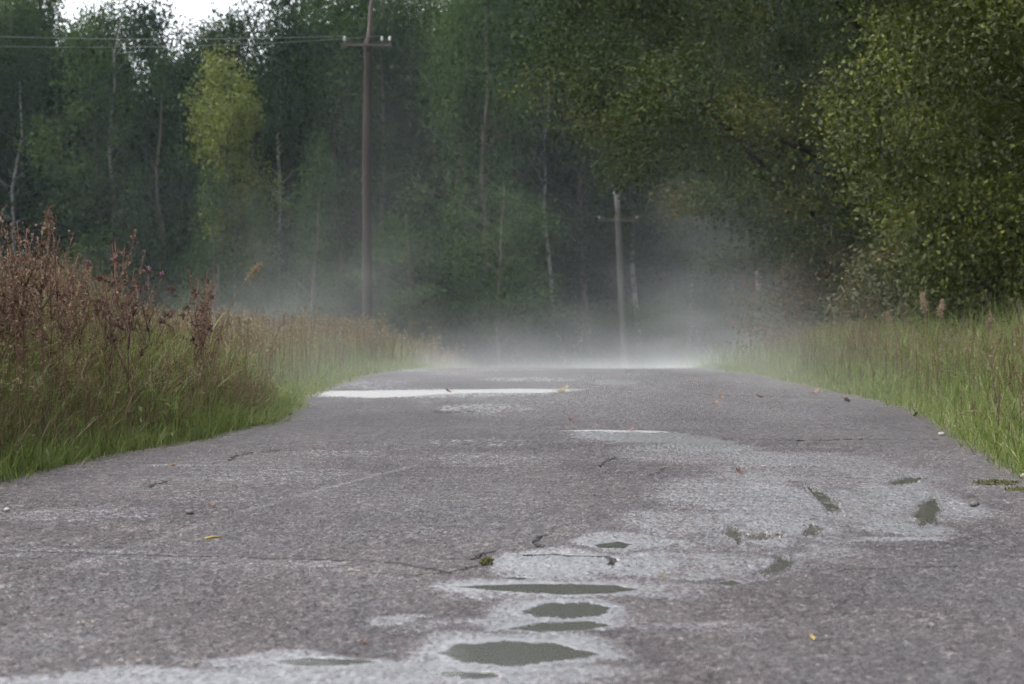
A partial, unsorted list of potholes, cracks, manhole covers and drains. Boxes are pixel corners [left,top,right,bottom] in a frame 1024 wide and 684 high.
pothole [802,483,848,519]
pothole [515,601,617,620]
pothole [907,494,945,529]
pothole [428,639,611,669]
pothole [442,583,649,596]
pothole [882,476,929,488]
pothole [738,531,788,540]
crack [523,534,618,566]
pothole [267,657,387,667]
pothole [592,541,637,549]
pothole [753,554,797,580]
pothole [501,620,615,633]
